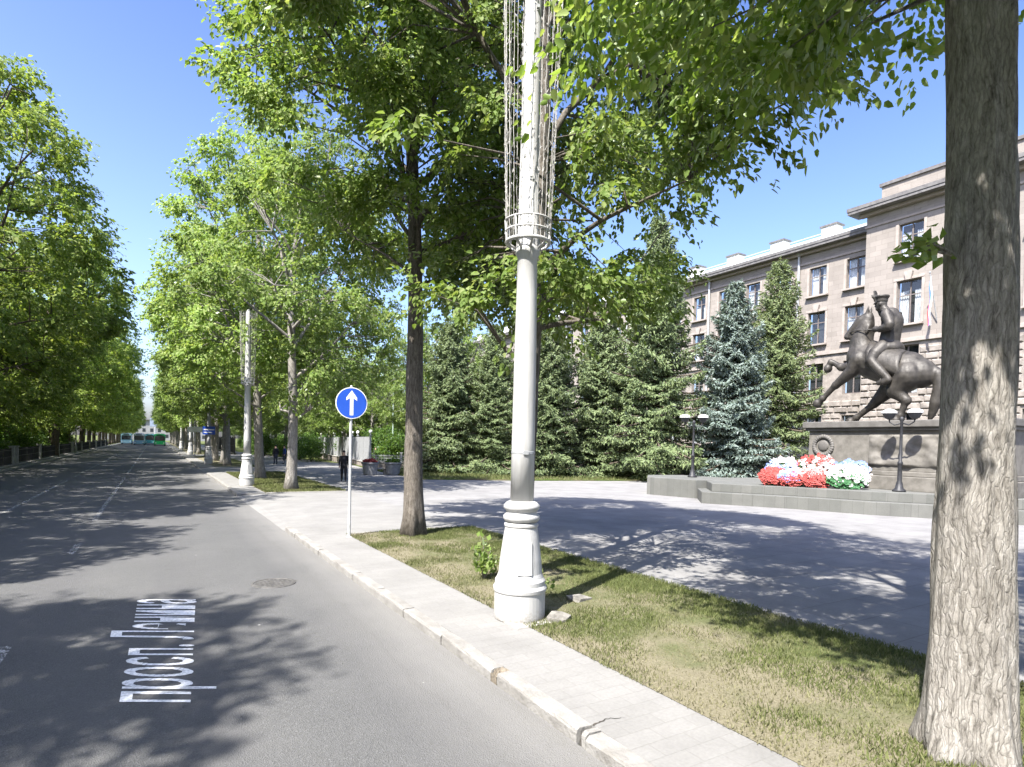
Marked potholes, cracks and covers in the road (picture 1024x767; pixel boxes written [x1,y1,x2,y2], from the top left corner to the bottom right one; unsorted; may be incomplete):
manhole cover [251,578,296,588]
